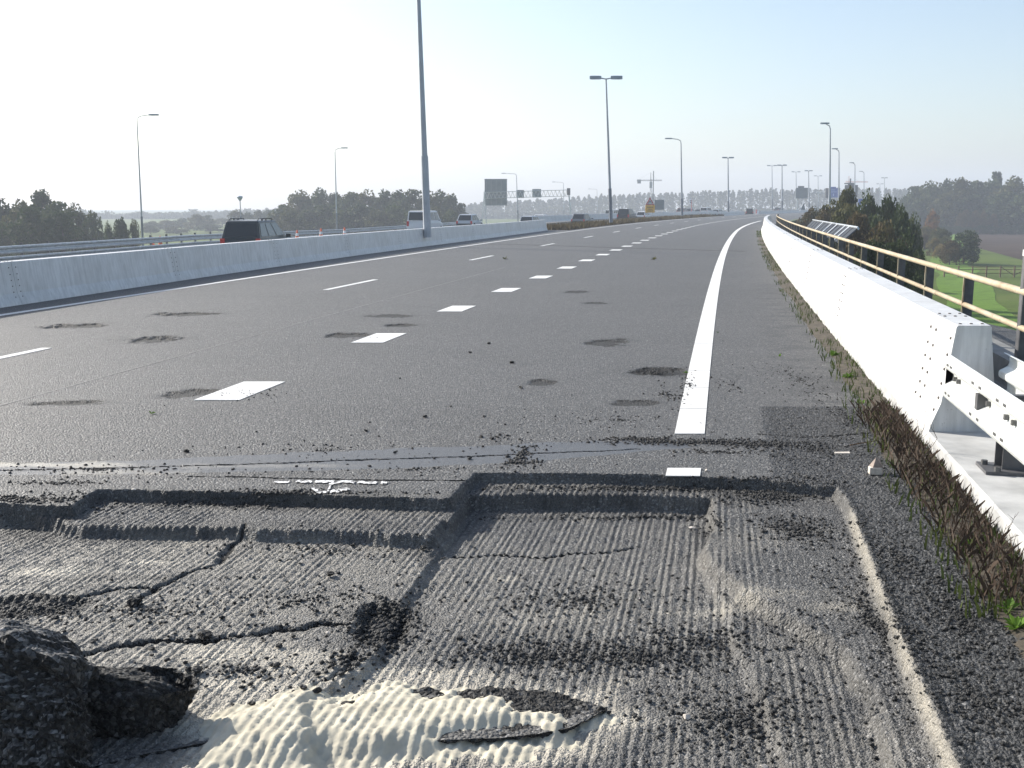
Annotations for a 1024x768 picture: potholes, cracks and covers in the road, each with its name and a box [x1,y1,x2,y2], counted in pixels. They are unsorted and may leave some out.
pothole [630,367,688,377]
crack [83,621,344,657]
crack [47,523,248,609]
pothole [159,389,219,399]
pothole [585,338,628,347]
pothole [124,335,186,344]
crack [452,546,641,559]
